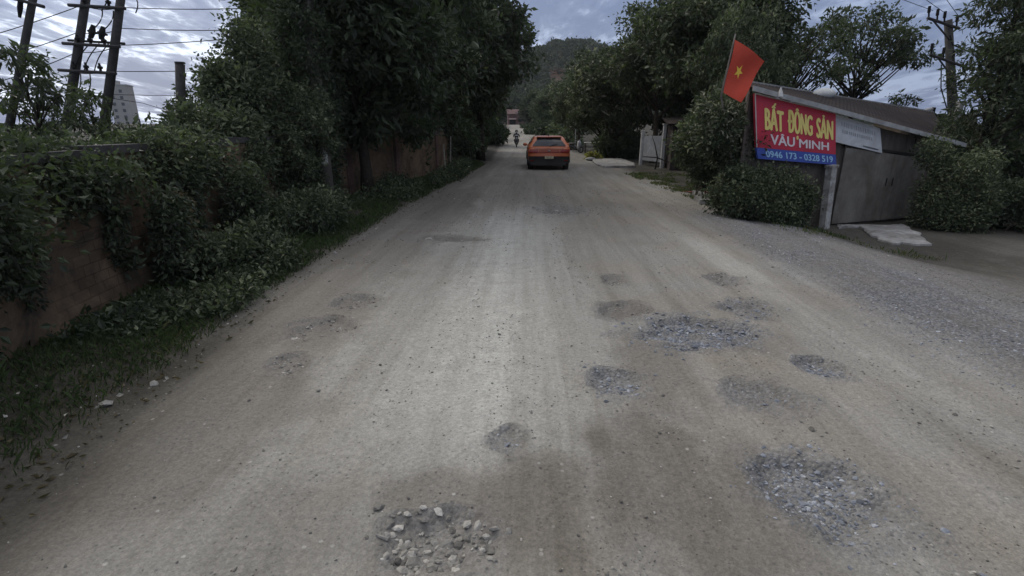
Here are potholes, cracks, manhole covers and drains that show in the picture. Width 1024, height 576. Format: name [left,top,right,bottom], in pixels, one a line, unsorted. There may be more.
pothole [322,292,382,310]
pothole [334,500,522,576]
pothole [588,299,663,321]
pothole [600,273,629,286]
pothole [600,306,806,366]
pothole [714,375,823,421]
pothole [699,271,751,288]
pothole [276,314,374,348]
pothole [406,233,493,243]
pothole [484,422,533,459]
pothole [782,354,861,381]
pothole [707,296,790,321]
